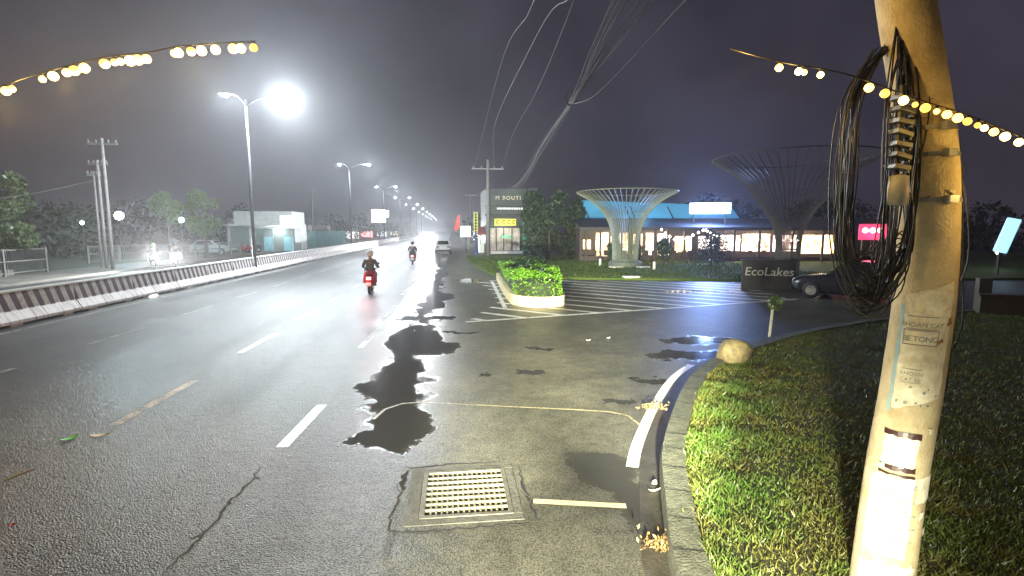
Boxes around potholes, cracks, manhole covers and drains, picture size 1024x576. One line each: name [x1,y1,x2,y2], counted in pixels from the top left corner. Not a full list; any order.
drain grate [403,465,525,527]
crack [162,466,261,576]
